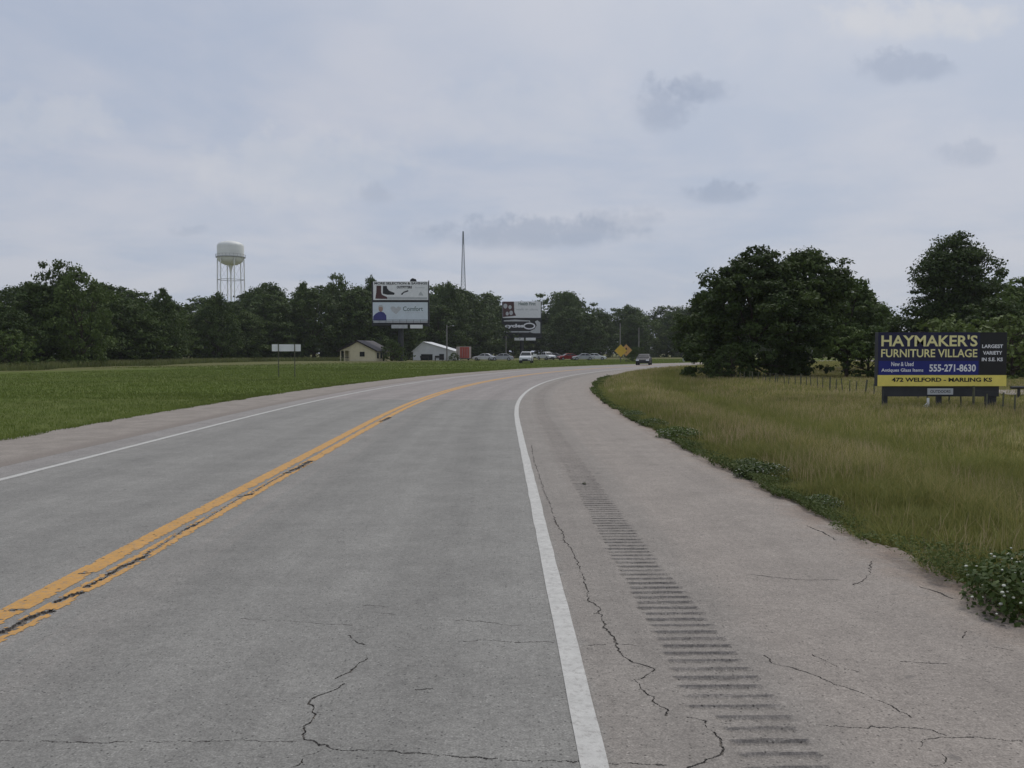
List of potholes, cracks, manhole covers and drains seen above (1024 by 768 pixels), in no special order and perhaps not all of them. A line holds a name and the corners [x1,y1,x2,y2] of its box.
crack [763,654,1021,766]
crack [0,618,662,767]
crack [743,561,872,585]
crack [687,717,725,768]
crack [531,446,669,716]
